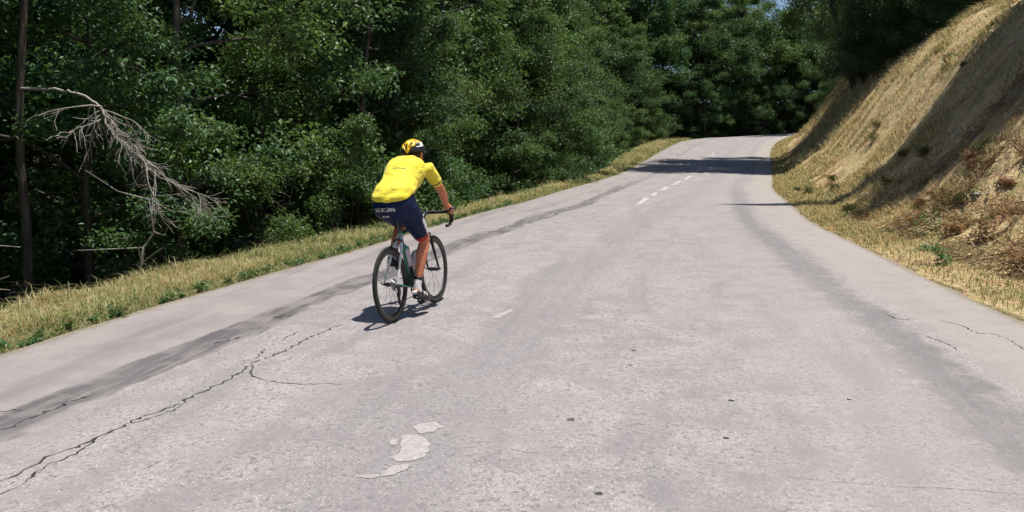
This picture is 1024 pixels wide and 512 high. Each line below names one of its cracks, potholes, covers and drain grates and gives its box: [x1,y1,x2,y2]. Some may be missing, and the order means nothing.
crack [0,324,342,495]
crack [885,314,1024,350]
